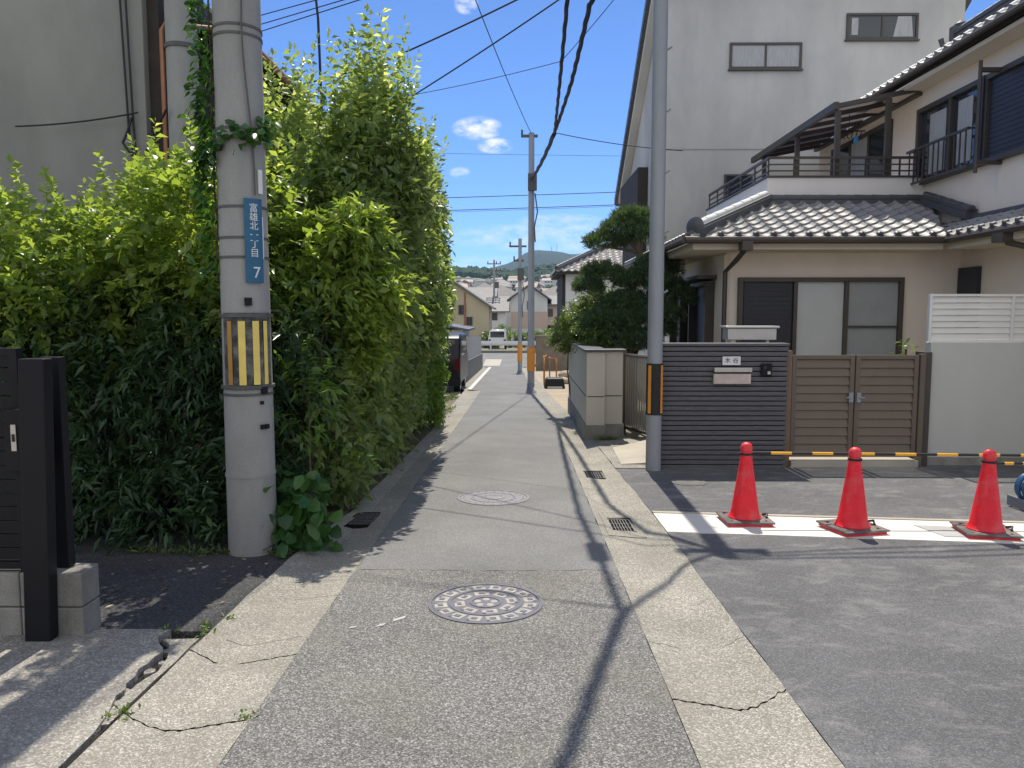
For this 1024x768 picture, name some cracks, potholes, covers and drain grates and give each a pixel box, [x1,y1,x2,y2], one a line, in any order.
drain grate [583,471,606,479]
crack [62,635,297,768]
manhole cover [428,583,543,624]
crack [672,690,785,711]
drain grate [608,518,636,532]
manhole cover [458,490,529,506]
drain grate [347,512,380,529]
